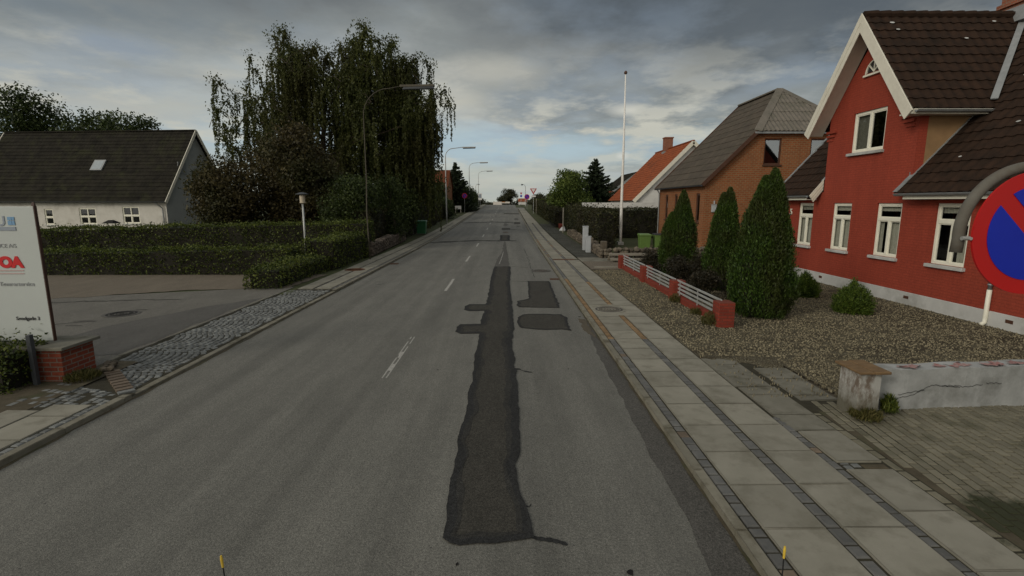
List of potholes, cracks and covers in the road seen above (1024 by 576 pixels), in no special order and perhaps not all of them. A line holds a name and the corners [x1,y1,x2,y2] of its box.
manhole cover [101,310,141,318]
